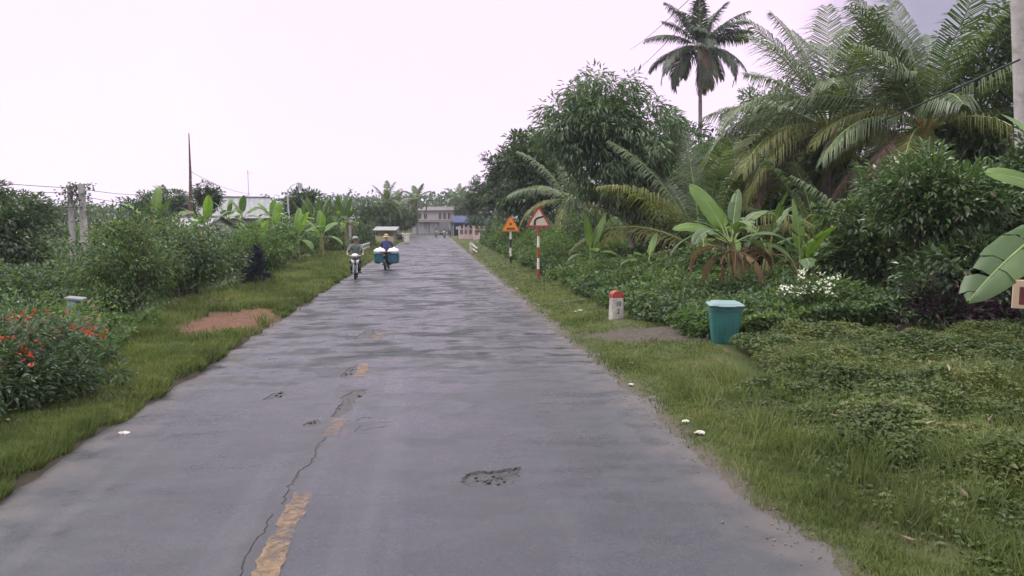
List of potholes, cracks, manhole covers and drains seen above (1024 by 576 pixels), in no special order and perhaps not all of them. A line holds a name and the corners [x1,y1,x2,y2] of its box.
pothole [353,329,386,339]
crack [240,437,326,576]
pothole [460,467,521,487]
pothole [331,389,368,417]
